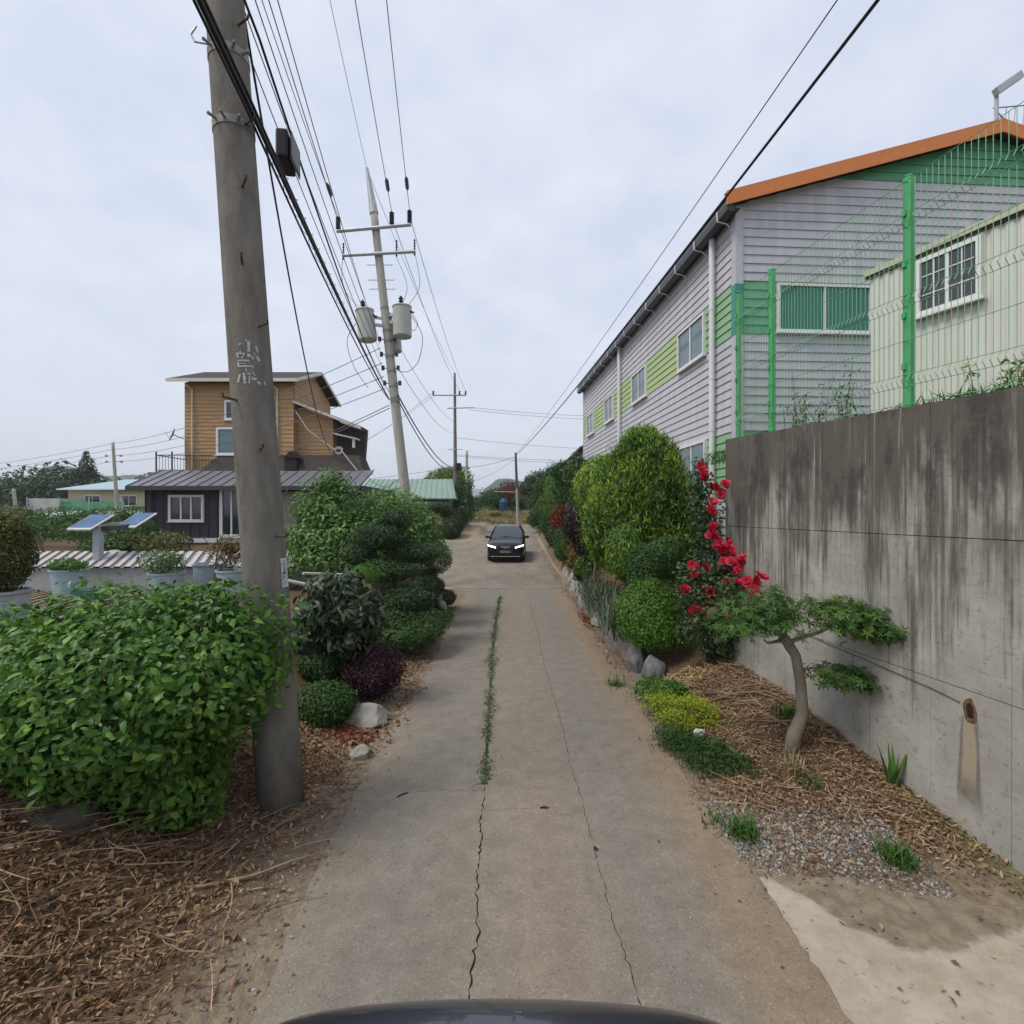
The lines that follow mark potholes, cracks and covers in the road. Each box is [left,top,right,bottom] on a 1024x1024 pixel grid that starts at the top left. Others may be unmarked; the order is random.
crack [536,629,641,1005]
